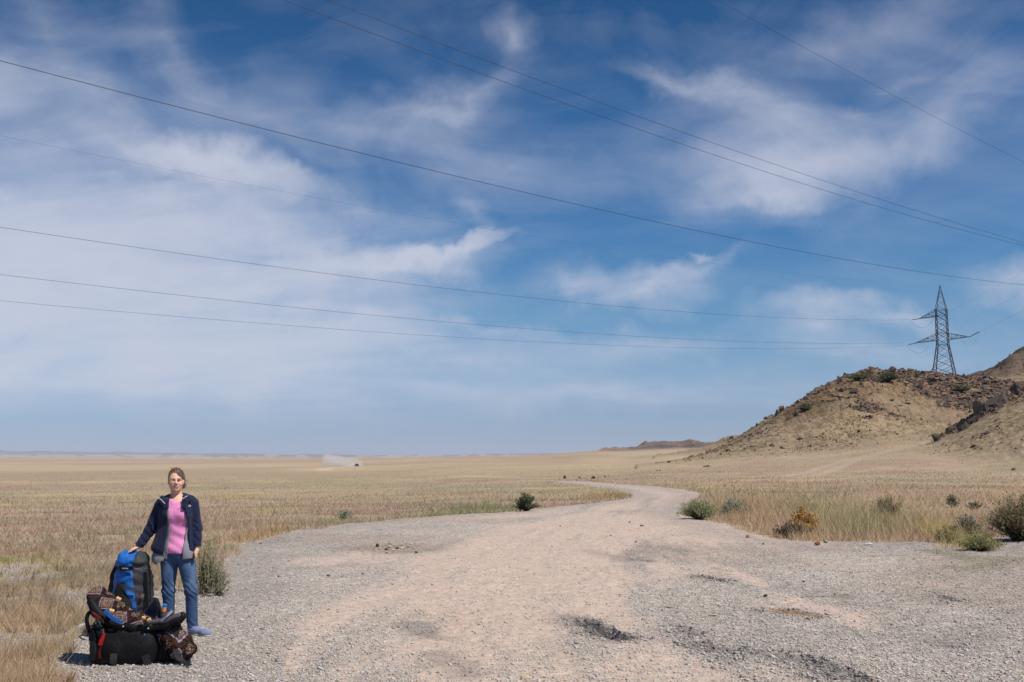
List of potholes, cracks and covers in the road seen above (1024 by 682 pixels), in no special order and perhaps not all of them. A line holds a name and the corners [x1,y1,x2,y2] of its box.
pothole [764,651,876,682]
pothole [564,620,638,641]
pothole [771,609,825,618]
